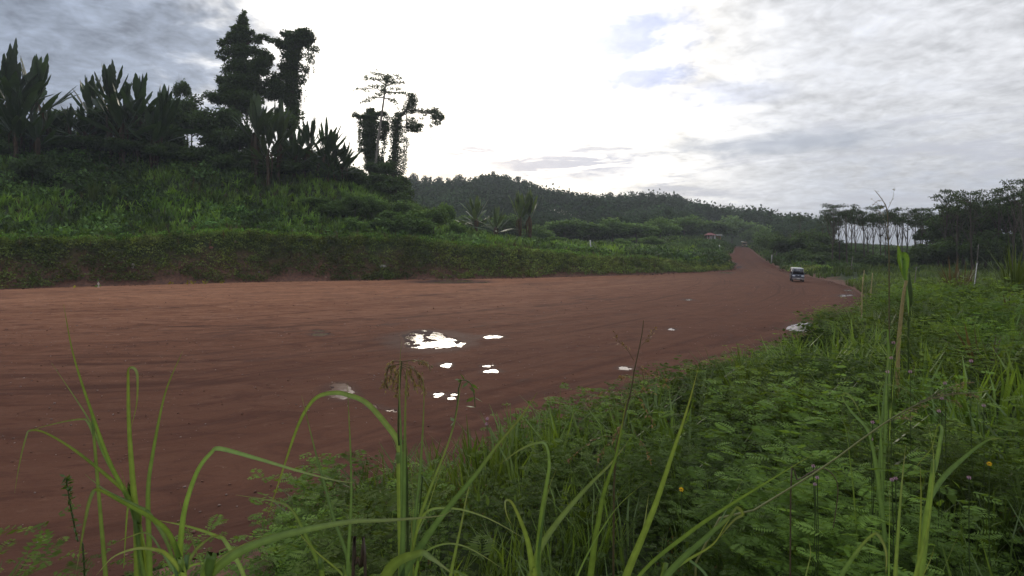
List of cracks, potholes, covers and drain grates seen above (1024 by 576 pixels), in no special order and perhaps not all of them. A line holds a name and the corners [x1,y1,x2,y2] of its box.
pothole [327,382,356,400]
pothole [399,329,468,349]
